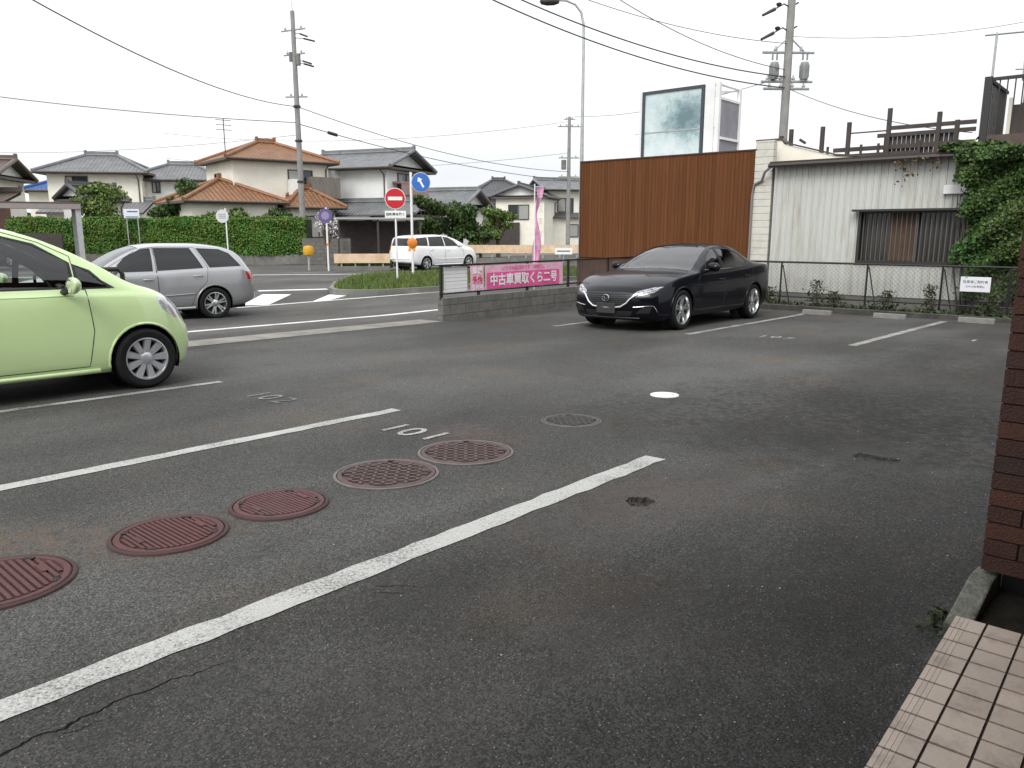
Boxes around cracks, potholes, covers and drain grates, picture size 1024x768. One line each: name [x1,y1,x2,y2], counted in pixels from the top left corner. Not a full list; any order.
manhole cover [417,440,514,466]
manhole cover [0,554,78,611]
pothole [852,453,901,463]
manhole cover [333,459,439,490]
manhole cover [541,414,601,427]
pothole [625,497,656,507]
crack [0,660,231,757]
manhole cover [228,488,329,522]
manhole cover [107,514,229,557]
